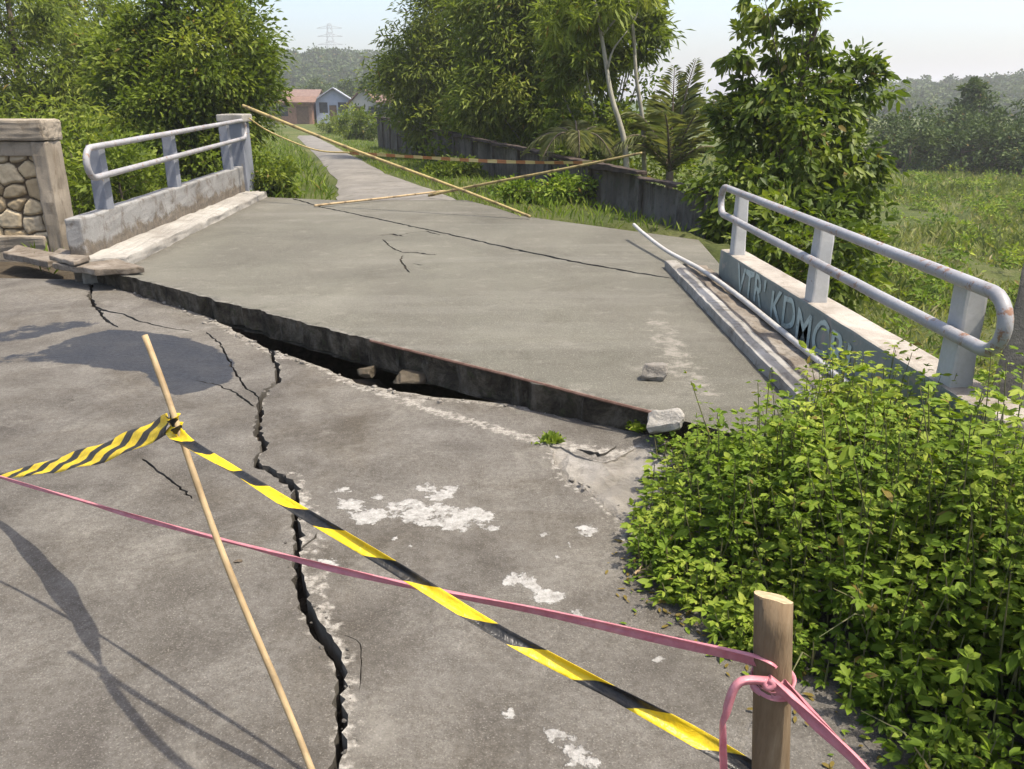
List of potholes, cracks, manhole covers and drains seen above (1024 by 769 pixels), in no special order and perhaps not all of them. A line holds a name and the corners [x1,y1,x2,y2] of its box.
crack [577,447,616,457]
crack [383,231,440,273]
crack [86,284,188,331]
crack [142,332,362,769]
